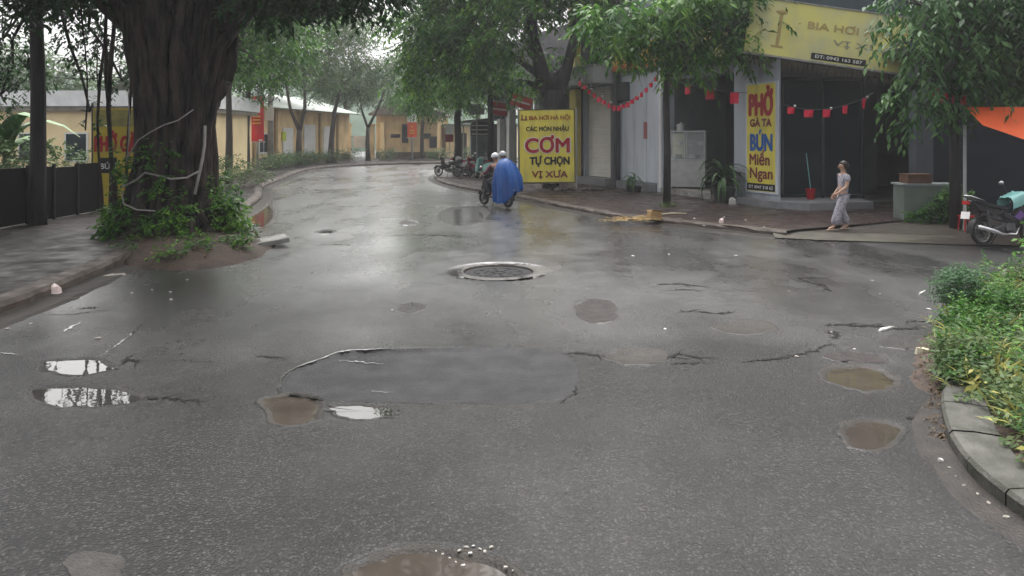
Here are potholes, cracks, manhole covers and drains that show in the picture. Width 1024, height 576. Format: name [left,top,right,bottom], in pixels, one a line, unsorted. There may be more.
pothole [338,543,526,576]
pothole [320,402,399,421]
crack [668,349,718,365]
manhole cover [458,264,553,281]
pothole [435,206,490,227]
pothole [253,392,327,427]
pothole [817,363,903,394]
crack [565,351,605,360]
pothole [834,417,911,452]
crack [744,319,940,363]
pothole [36,357,121,376]
pothole [23,383,148,409]
